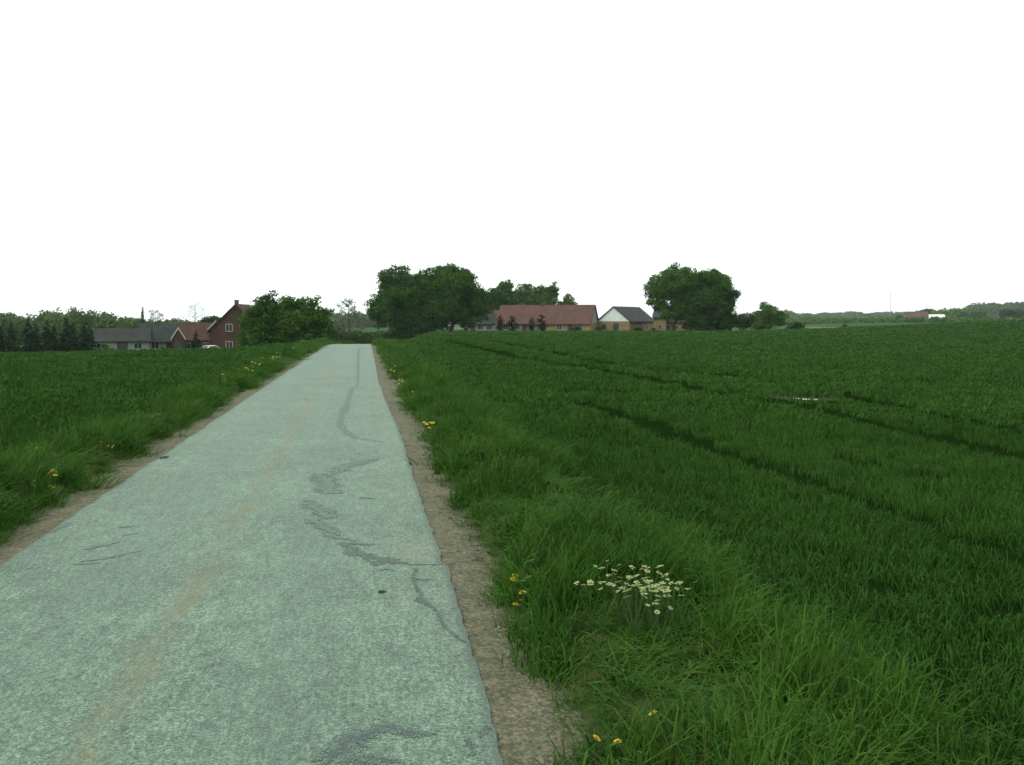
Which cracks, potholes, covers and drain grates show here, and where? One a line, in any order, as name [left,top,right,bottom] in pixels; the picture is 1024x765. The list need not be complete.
crack [50,522,141,565]
crack [309,721,437,765]
crack [298,350,469,644]
